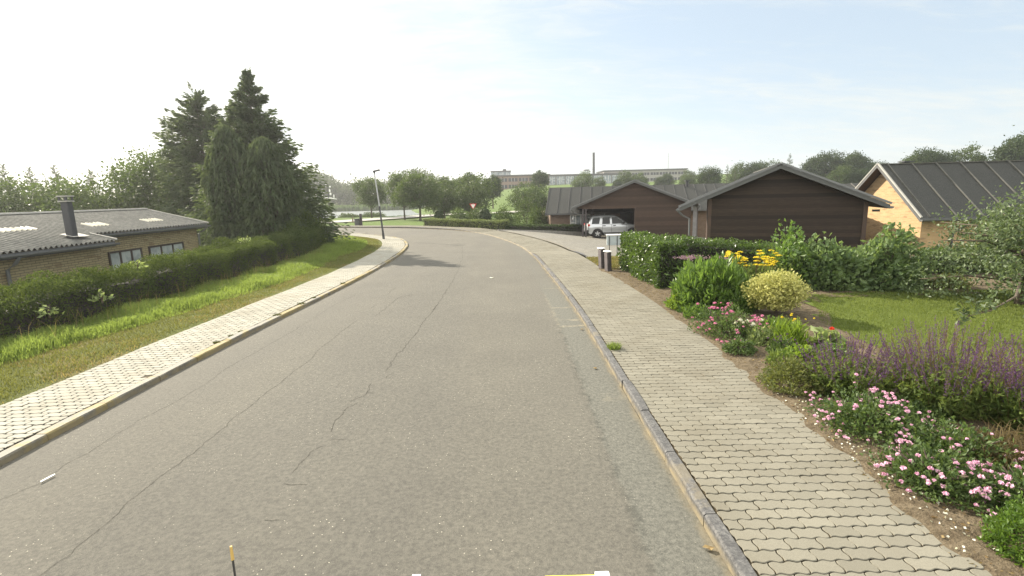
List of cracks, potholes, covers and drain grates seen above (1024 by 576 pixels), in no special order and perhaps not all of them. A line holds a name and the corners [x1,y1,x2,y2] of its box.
crack [297,256,463,467]
